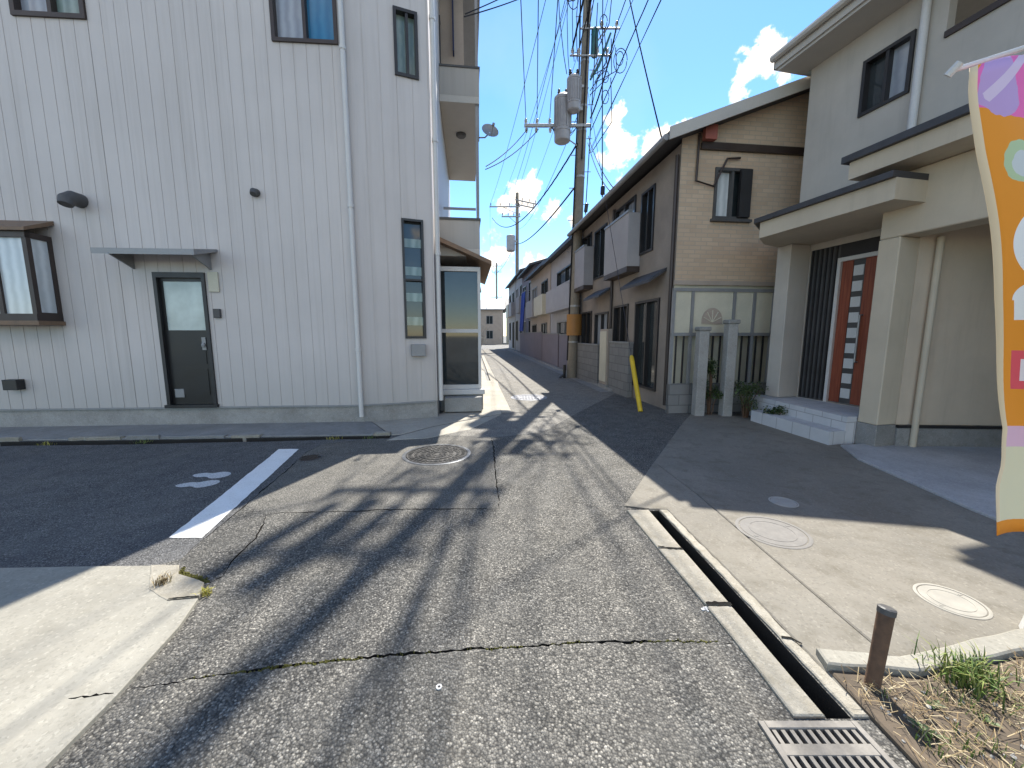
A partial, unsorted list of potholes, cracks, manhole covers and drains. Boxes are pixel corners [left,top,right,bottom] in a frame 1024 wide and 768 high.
utility cover [768,496,799,508]
utility cover [735,516,814,549]
manhole cover [402,444,471,466]
utility cover [913,583,994,620]
crack [132,638,732,689]
drain grate [757,721,899,768]
